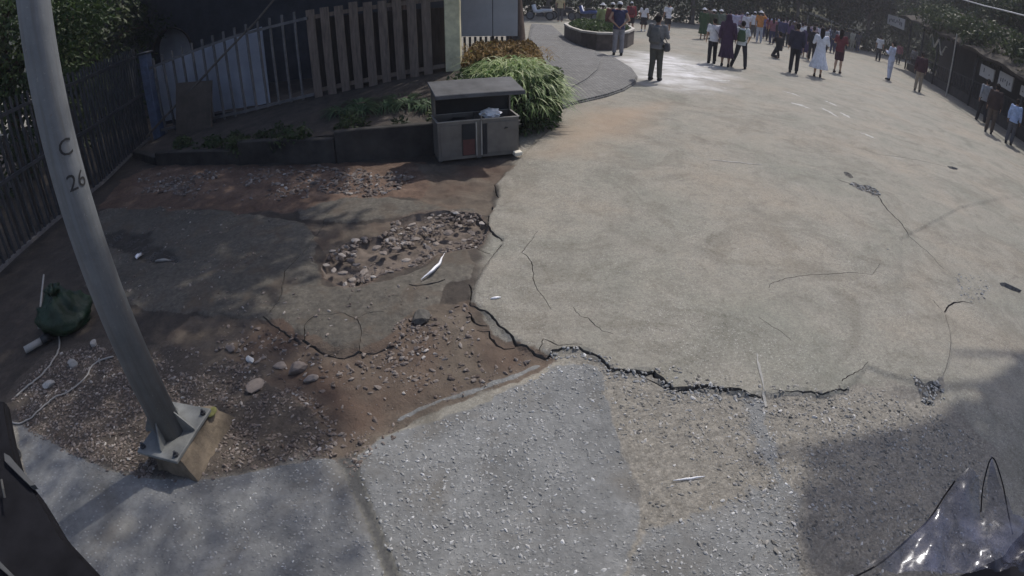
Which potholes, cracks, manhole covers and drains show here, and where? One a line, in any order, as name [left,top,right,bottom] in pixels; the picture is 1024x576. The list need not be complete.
crack [468,185,868,399]
crack [833,177,944,269]
pothole [913,374,945,406]
crack [904,286,973,372]
pothole [321,210,488,287]
crack [263,207,406,360]
